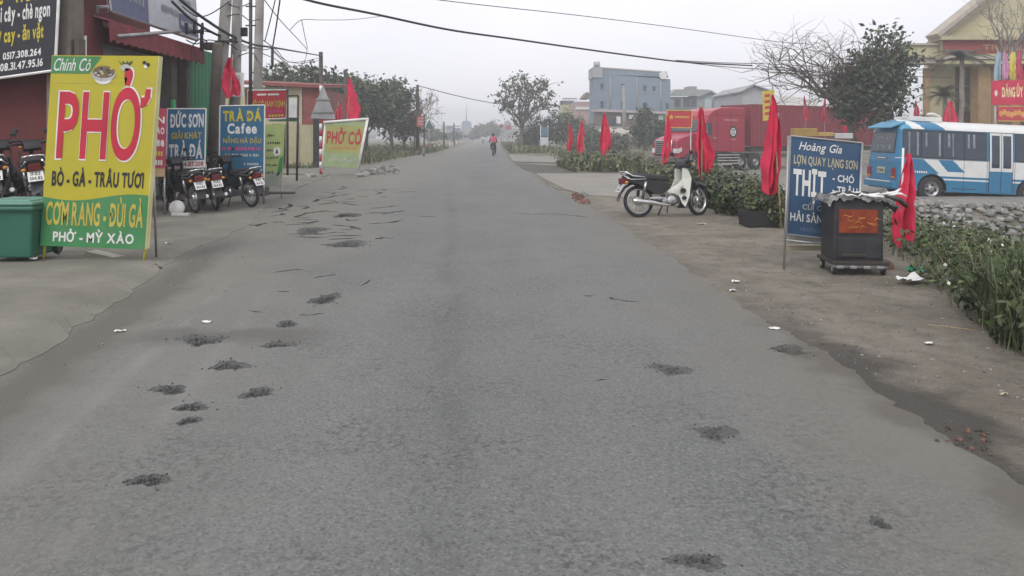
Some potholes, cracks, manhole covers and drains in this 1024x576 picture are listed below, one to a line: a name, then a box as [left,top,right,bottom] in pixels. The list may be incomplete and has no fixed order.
pothole [165,334,229,347]
pothole [306,292,342,306]
crack [254,186,413,245]
pothole [105,473,174,491]
pothole [237,383,282,399]
pothole [661,550,744,574]
pothole [172,400,218,411]
crack [273,269,370,292]
pothole [252,340,308,348]
pothole [692,423,746,445]
pothole [276,320,298,328]
pothole [171,416,204,426]
